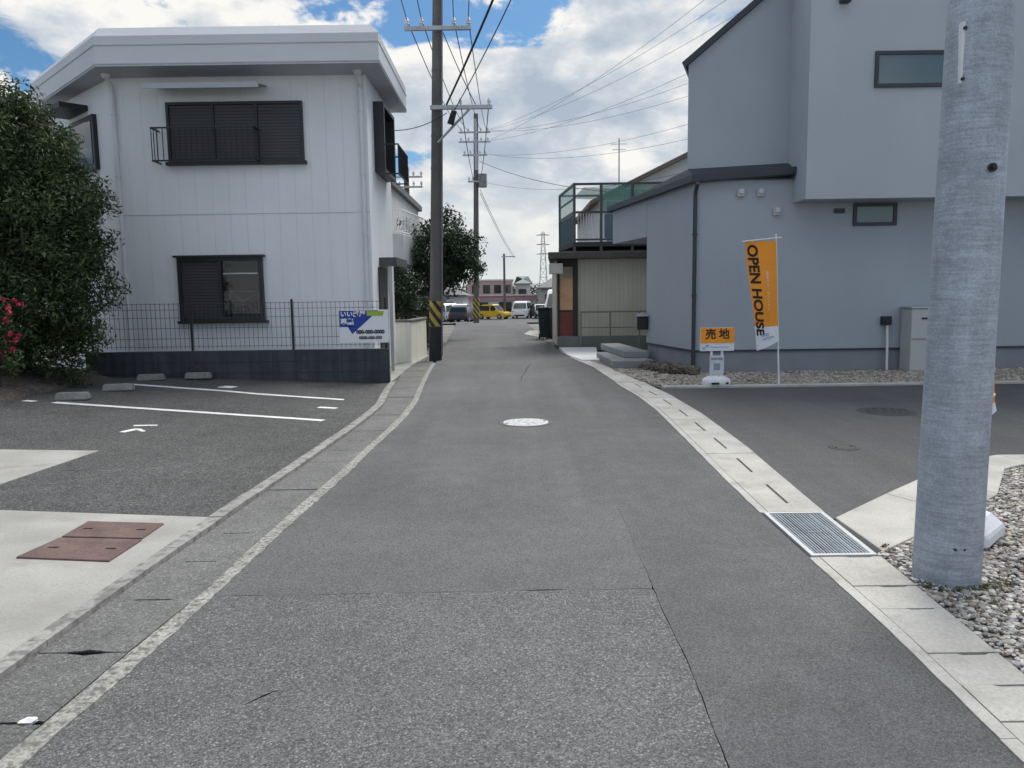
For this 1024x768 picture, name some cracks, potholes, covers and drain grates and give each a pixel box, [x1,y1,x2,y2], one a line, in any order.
drain grate [763,511,877,558]
manhole cover [499,418,552,427]
manhole cover [856,407,919,416]
